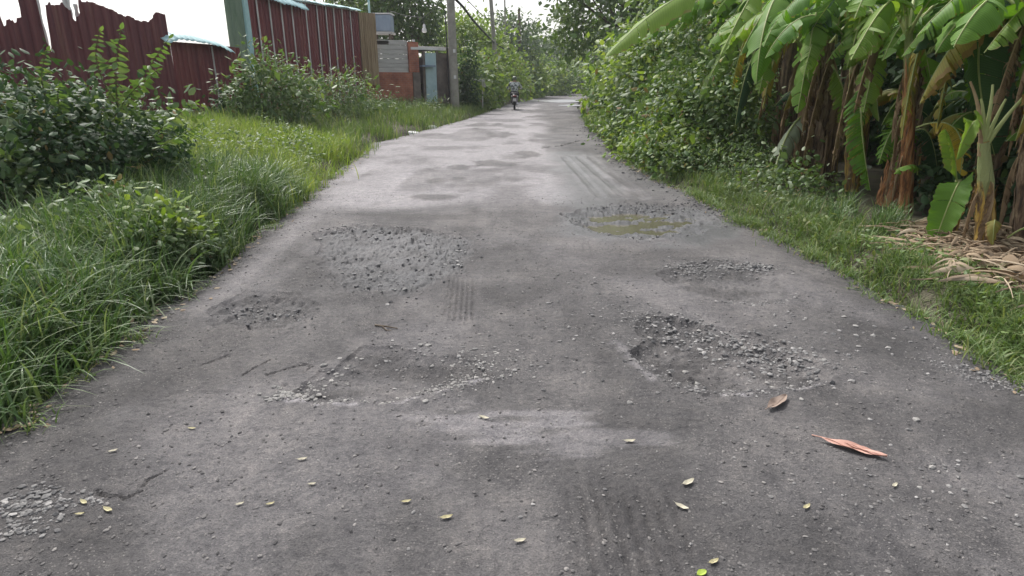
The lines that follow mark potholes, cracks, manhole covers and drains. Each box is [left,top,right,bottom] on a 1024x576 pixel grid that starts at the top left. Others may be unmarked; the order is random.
crack [199,354,314,376]
pothole [627,314,838,400]
pothole [281,345,494,406]
pothole [312,224,478,298]
pothole [655,259,800,306]
pothole [205,289,321,333]
crack [93,468,172,501]
pothole [564,205,730,240]
